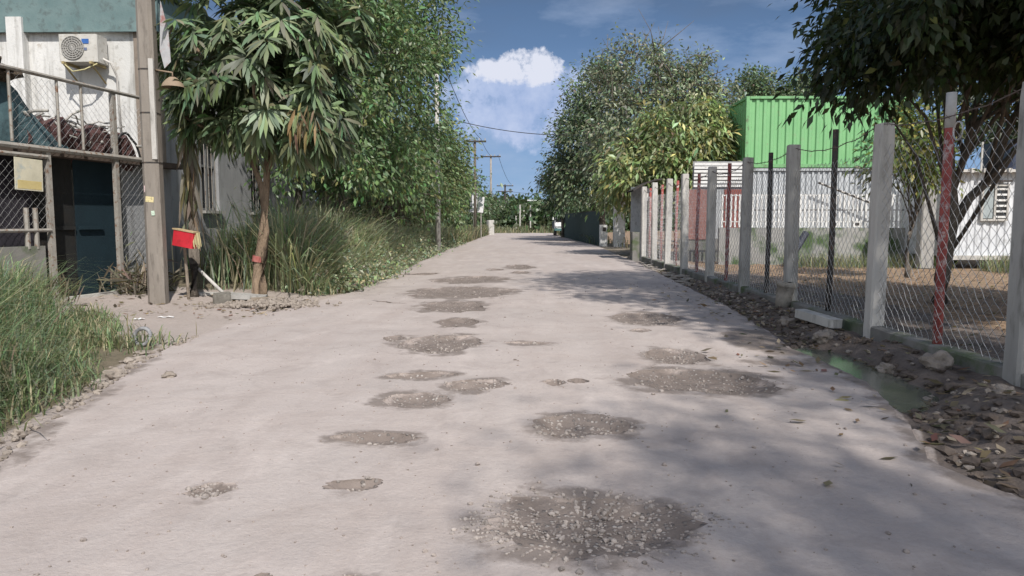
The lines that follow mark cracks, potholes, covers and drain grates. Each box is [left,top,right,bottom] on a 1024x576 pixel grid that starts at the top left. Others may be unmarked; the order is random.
pothole [618,367,793,396]
pothole [382,392,451,408]
pothole [449,488,745,575]
pothole [322,476,383,492]
pothole [403,286,519,298]
pothole [176,482,238,500]
pothole [384,371,459,379]
pothole [612,312,681,325]
pothole [419,301,488,313]
pothole [443,378,513,391]
pothole [641,348,716,364]
pothole [437,317,480,327]
